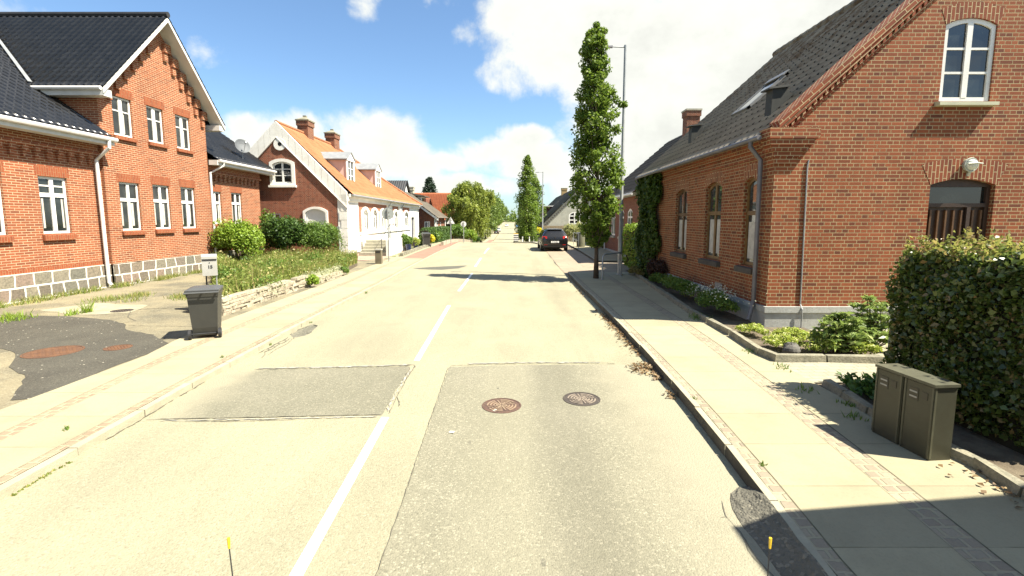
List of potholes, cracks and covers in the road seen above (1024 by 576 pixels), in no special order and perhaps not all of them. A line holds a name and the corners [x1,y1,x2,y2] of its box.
manhole cover [563,392,601,406]
manhole cover [20,345,85,359]
manhole cover [482,398,521,413]
